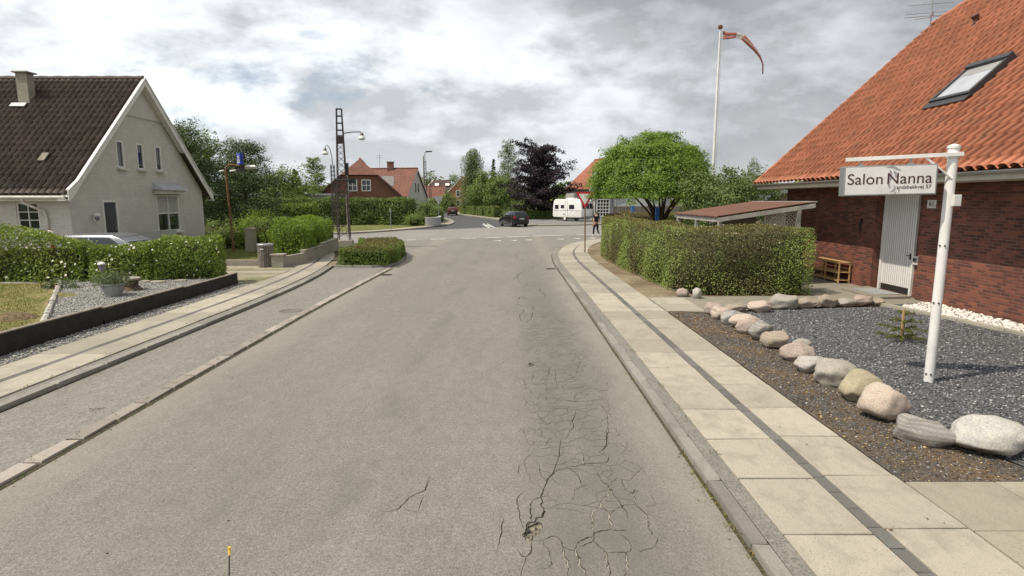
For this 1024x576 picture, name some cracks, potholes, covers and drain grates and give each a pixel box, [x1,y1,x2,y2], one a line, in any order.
crack [381,477,430,512]
crack [513,254,548,321]
pothole [523,522,543,543]
crack [498,313,660,576]
